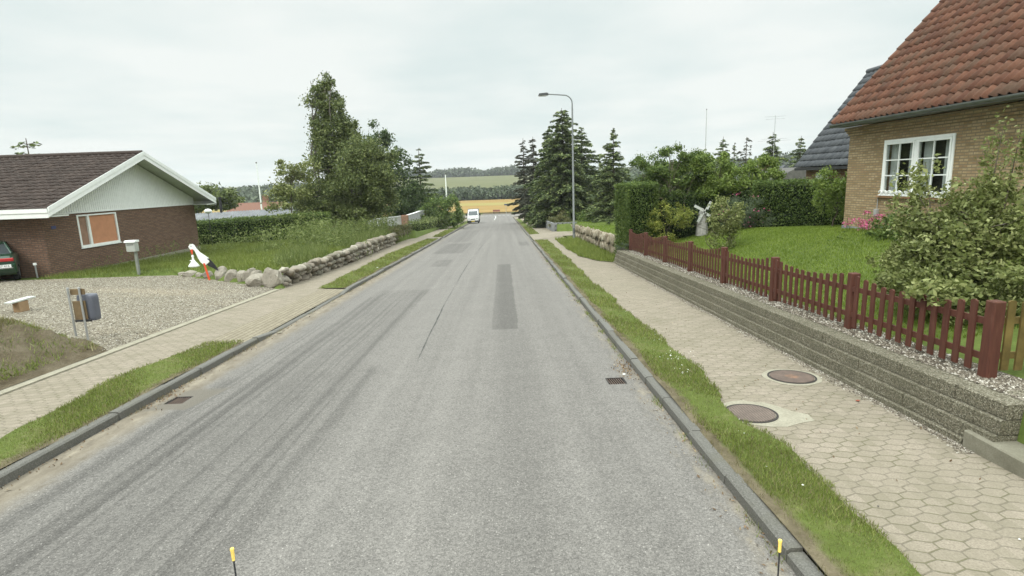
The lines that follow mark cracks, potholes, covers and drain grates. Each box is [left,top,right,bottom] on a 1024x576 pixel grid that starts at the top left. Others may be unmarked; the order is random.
manhole cover [762,369,822,386]
drain grate [166,396,193,404]
manhole cover [723,400,815,427]
crack [418,247,481,359]
